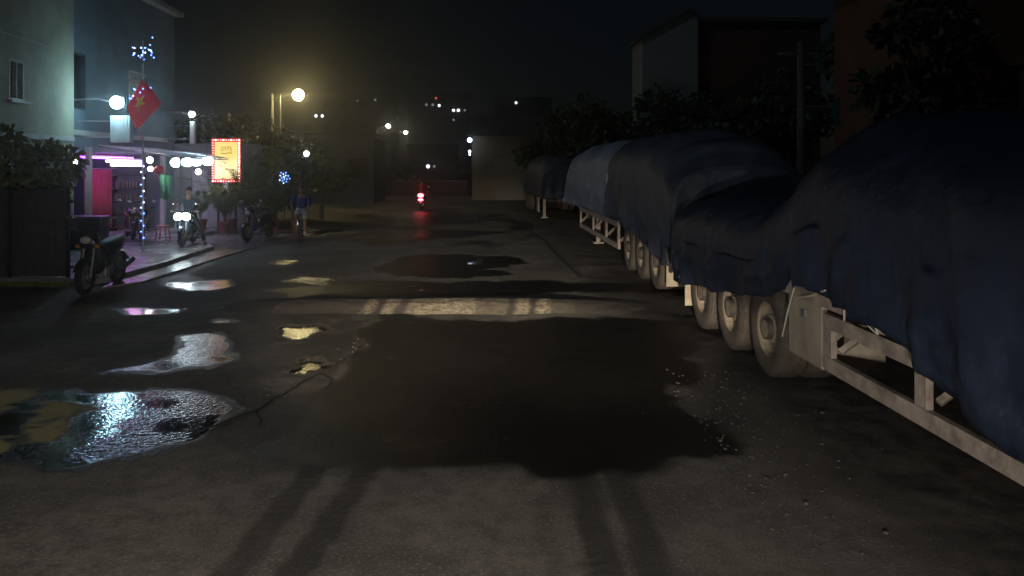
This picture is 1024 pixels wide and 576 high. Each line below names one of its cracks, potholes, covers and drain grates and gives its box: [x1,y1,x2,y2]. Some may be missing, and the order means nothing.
pothole [275,323,335,341]
pothole [281,355,336,376]
crack [193,339,369,435]
